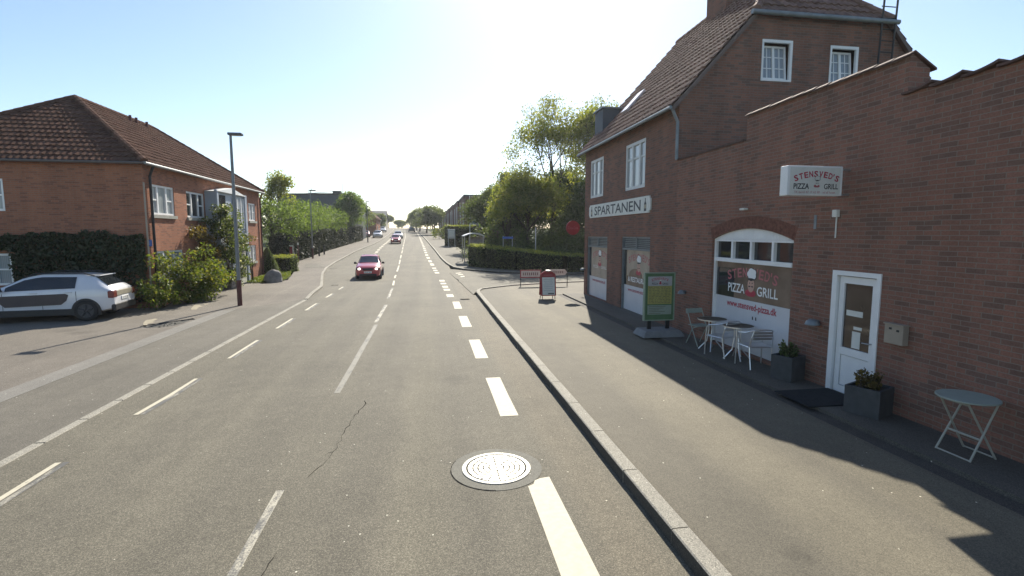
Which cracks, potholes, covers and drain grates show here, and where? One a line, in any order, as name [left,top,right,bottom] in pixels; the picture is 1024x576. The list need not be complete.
manhole cover [450,449,542,491]
